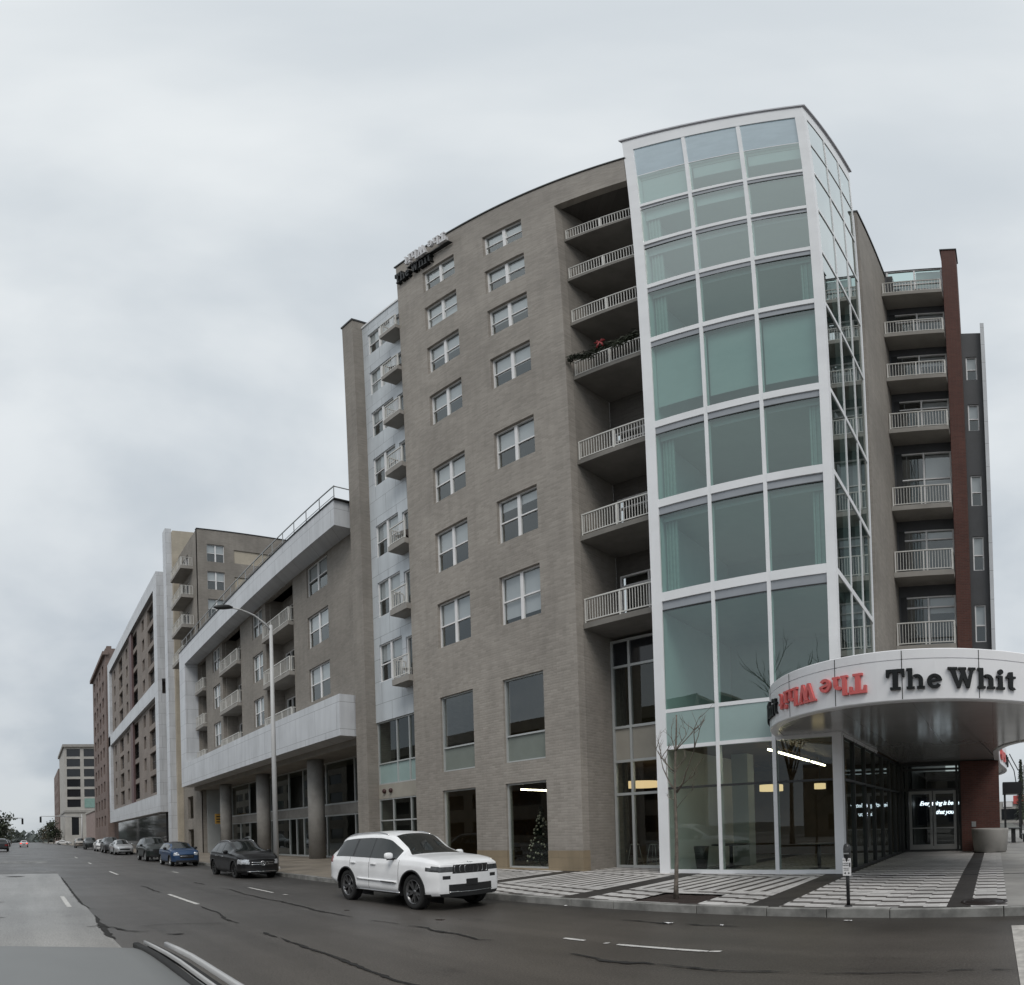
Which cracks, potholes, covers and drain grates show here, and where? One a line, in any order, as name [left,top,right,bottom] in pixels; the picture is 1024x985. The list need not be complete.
crack [571,953,781,972]
crack [263,920,489,985]
manhole cover [961,898,1008,907]
crack [86,888,351,939]
